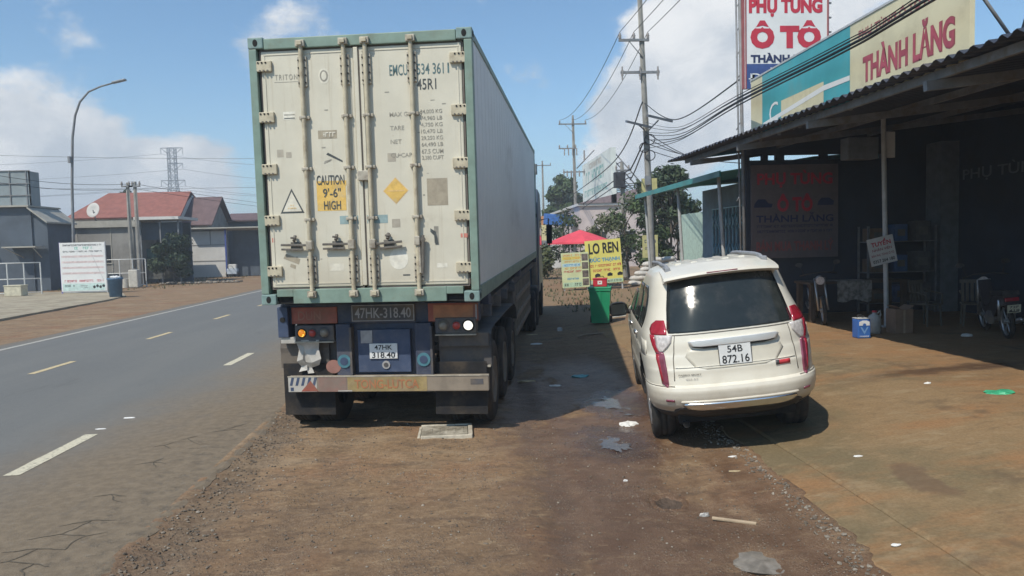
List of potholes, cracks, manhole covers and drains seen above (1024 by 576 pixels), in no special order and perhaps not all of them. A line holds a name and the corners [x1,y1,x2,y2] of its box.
crack [136,423,247,467]
manhole cover [417,423,473,439]
pothole [649,494,689,512]
crack [0,520,105,576]
